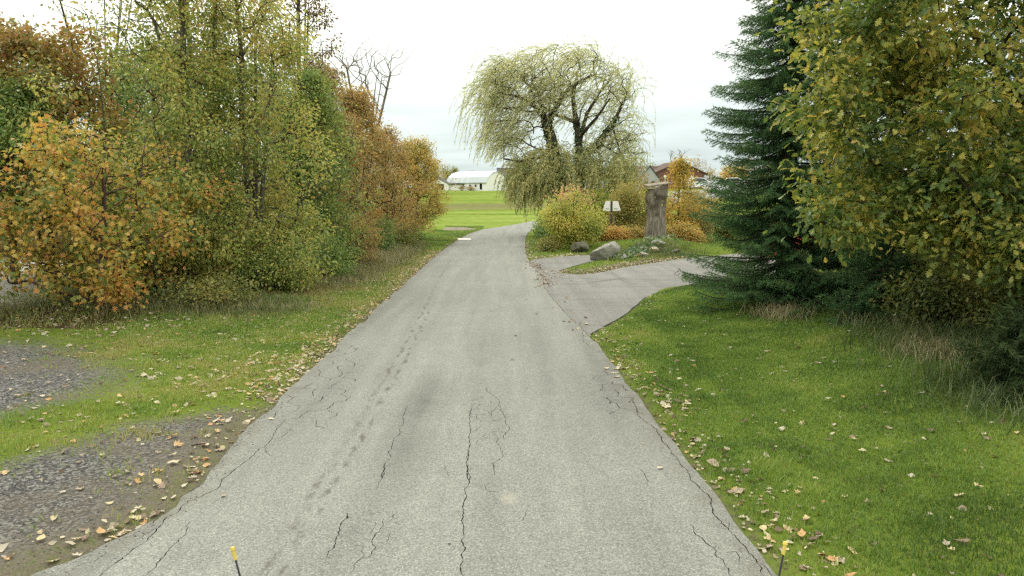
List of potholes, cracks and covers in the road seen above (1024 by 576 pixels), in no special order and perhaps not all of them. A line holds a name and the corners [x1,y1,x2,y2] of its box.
crack [326,512,394,574]
crack [447,397,510,576]
crack [582,332,770,574]
